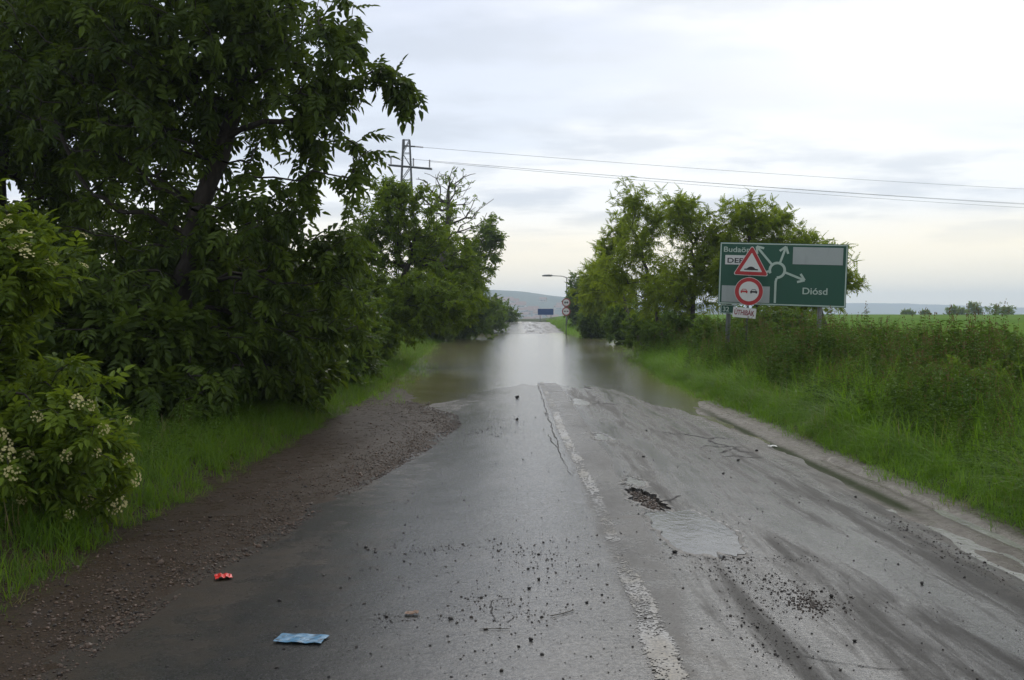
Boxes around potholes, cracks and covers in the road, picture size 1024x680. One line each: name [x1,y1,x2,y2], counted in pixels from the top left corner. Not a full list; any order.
crack [667,432,763,458]
pothole [621,487,674,512]
